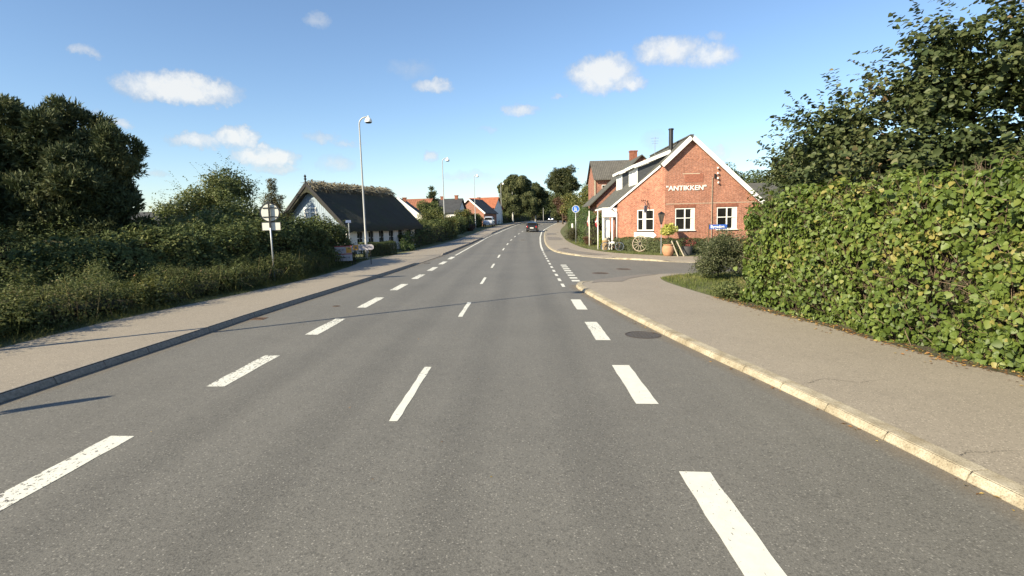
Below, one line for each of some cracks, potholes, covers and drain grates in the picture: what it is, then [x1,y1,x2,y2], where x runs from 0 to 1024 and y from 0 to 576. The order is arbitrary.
manhole cover [625,331,662,339]
